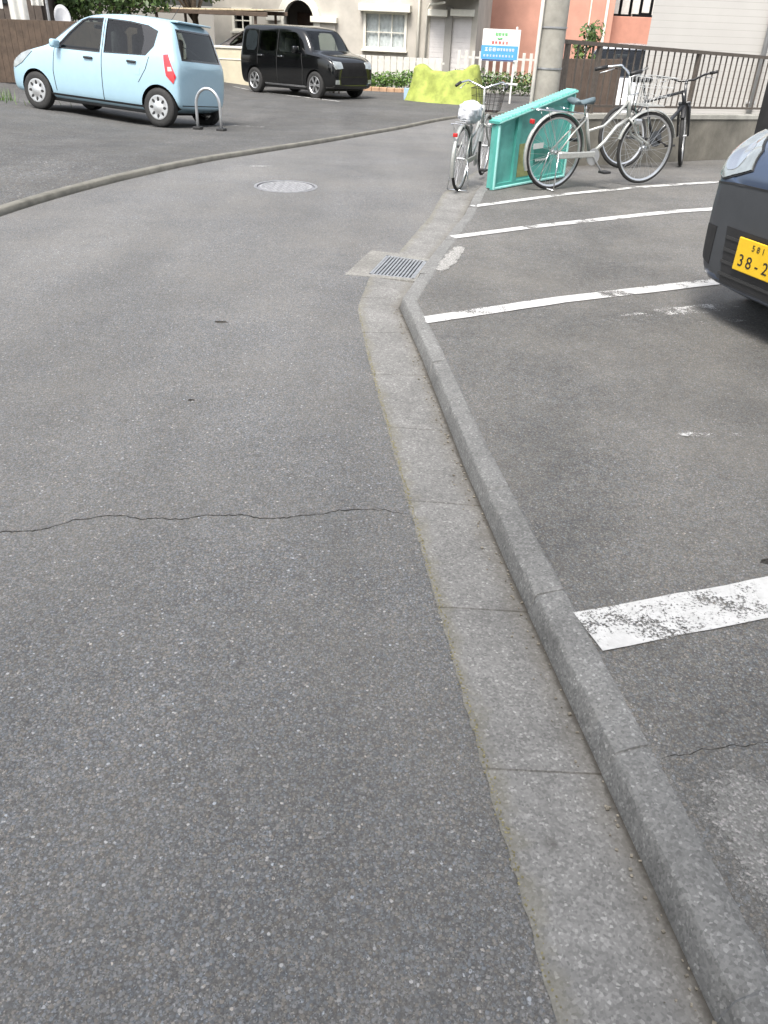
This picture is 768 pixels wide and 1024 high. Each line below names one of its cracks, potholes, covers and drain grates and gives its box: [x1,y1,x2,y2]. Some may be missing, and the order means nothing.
crack [662,742,768,759]
crack [0,509,406,533]
manhole cover [254,180,318,193]
drain grate [369,255,427,279]
